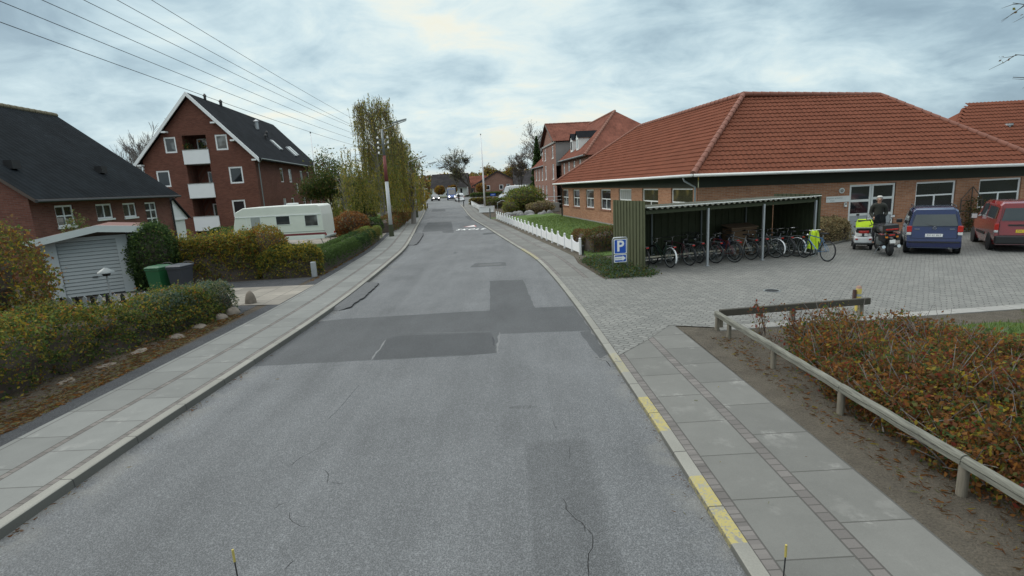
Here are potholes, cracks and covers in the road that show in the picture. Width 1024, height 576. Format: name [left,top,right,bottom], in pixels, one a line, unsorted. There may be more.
crack [563,499,593,576]
